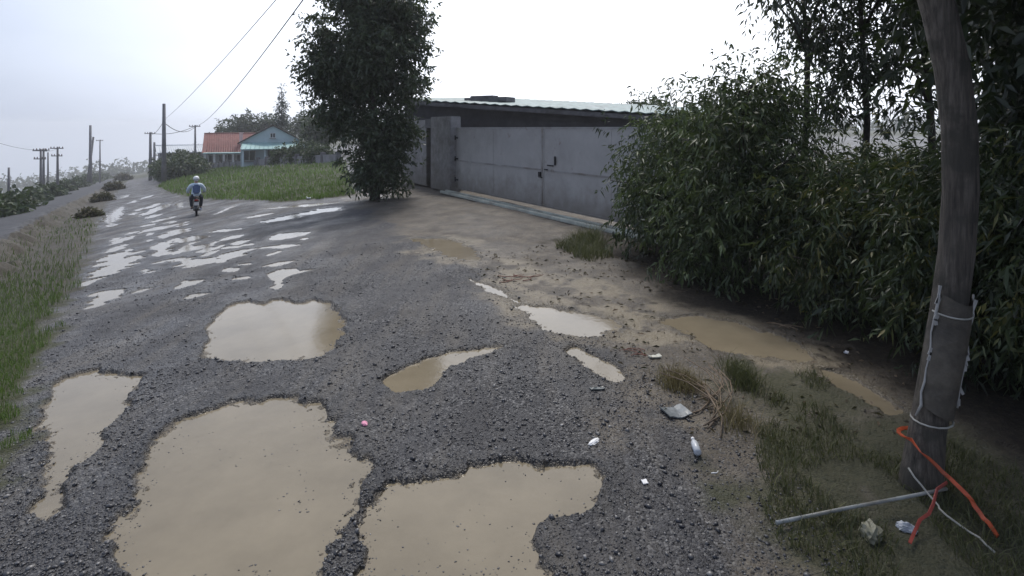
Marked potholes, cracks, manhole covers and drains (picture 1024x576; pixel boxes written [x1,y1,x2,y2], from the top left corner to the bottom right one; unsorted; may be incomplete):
pothole [16,366,152,524]
pothole [561,342,634,384]
pothole [351,452,613,576]
pothole [168,247,258,269]
pothole [172,234,205,244]
pothole [180,291,214,300]
pothole [95,392,380,576]
pothole [133,220,192,234]
pothole [82,287,131,310]
pothole [259,259,298,268]
pothole [85,251,148,281]
pothole [194,297,350,364]
